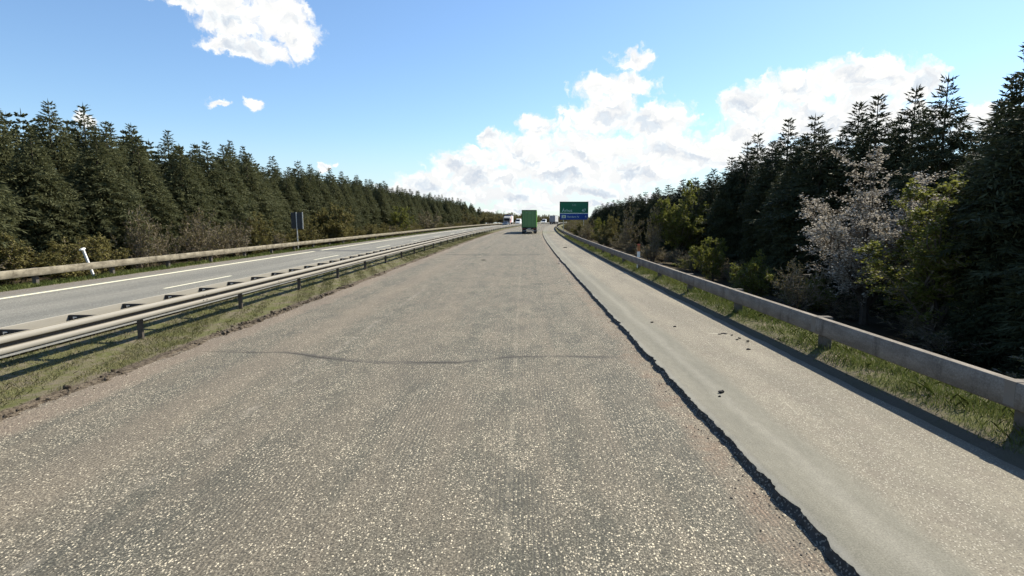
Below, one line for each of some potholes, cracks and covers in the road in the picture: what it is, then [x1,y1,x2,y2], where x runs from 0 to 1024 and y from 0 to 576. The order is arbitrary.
crack [211,351,571,363]
